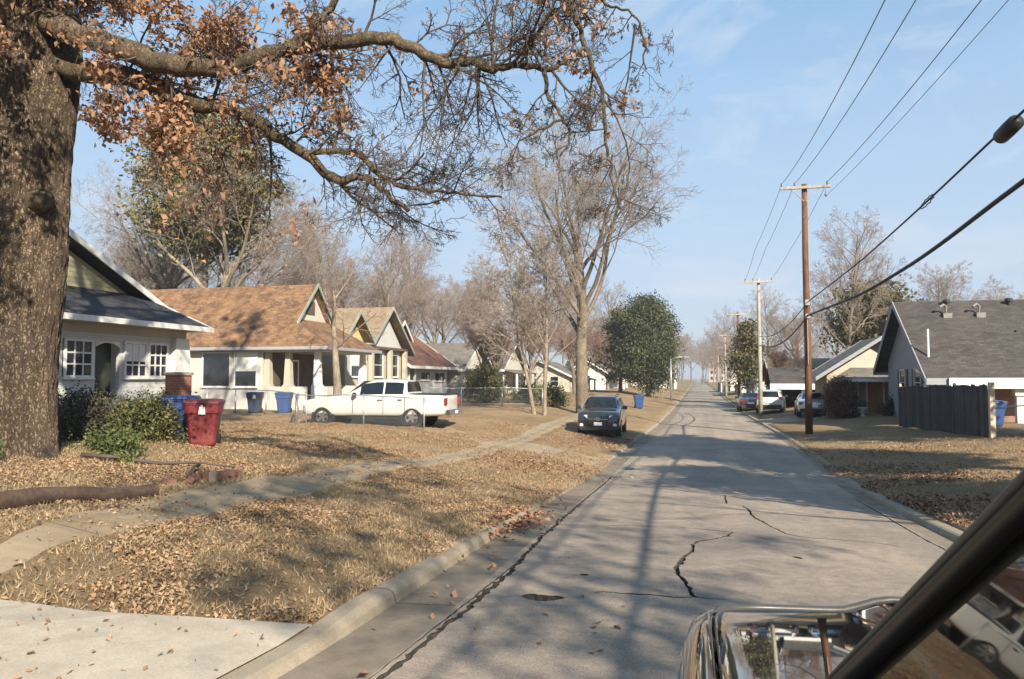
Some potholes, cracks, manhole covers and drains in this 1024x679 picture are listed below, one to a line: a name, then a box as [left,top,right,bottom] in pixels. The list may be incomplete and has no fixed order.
crack [369,477,611,679]
crack [634,496,786,598]
